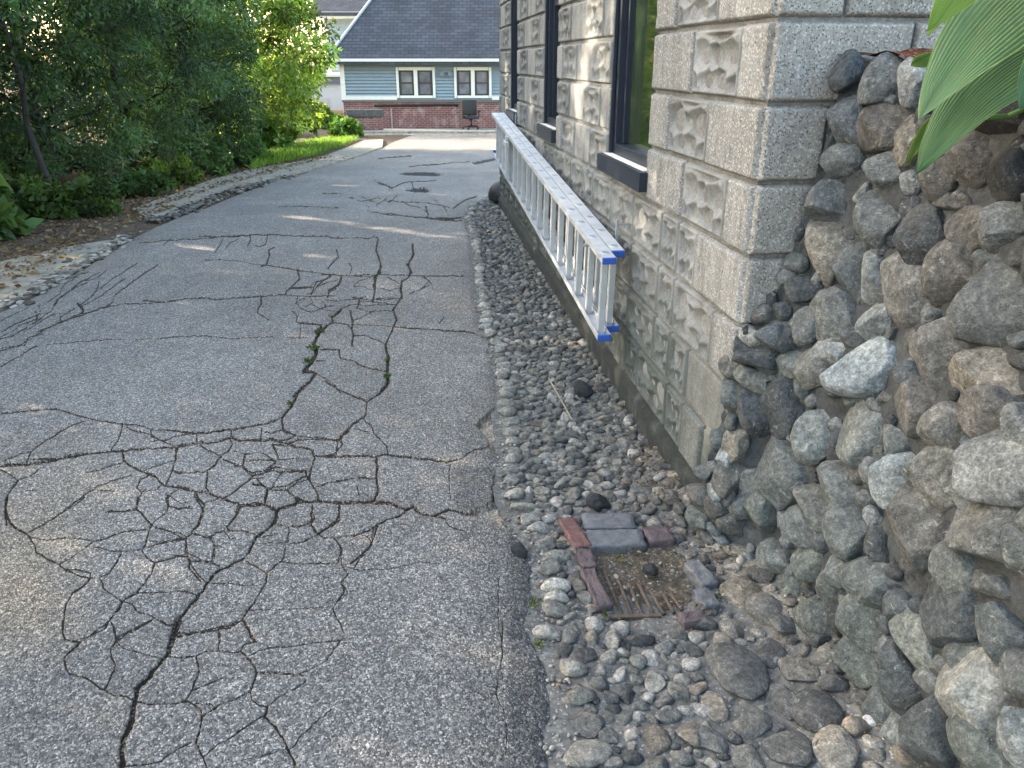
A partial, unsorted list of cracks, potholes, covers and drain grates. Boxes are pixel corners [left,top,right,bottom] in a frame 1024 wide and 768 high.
crack [0,234,486,768]
crack [496,580,508,754]
drain grate [594,542,695,621]
crack [279,155,476,222]
